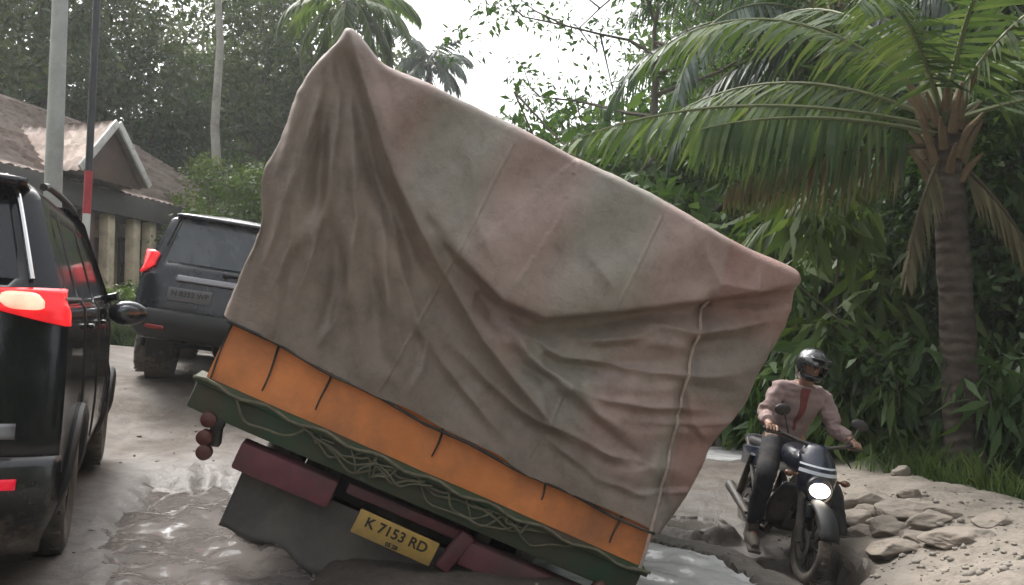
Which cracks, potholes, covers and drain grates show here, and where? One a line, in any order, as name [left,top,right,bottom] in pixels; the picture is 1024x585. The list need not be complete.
pothole [81,459,355,585]
pothole [759,552,879,585]
pothole [516,539,757,585]
pothole [666,515,724,530]
